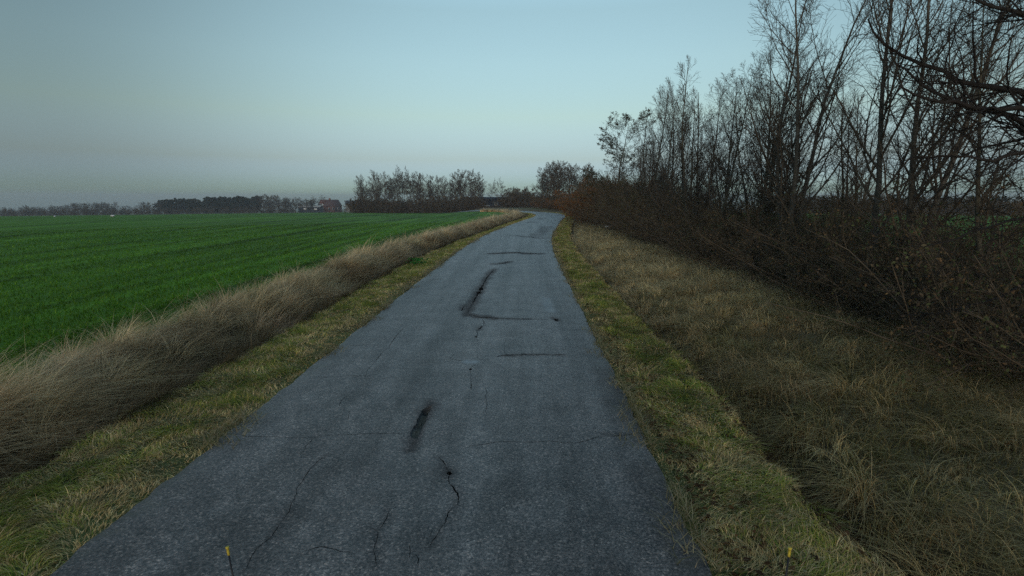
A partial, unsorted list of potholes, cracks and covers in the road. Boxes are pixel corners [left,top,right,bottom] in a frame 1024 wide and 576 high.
crack [409,459,459,563]
crack [437,234,563,413]
pothole [410,406,431,438]
